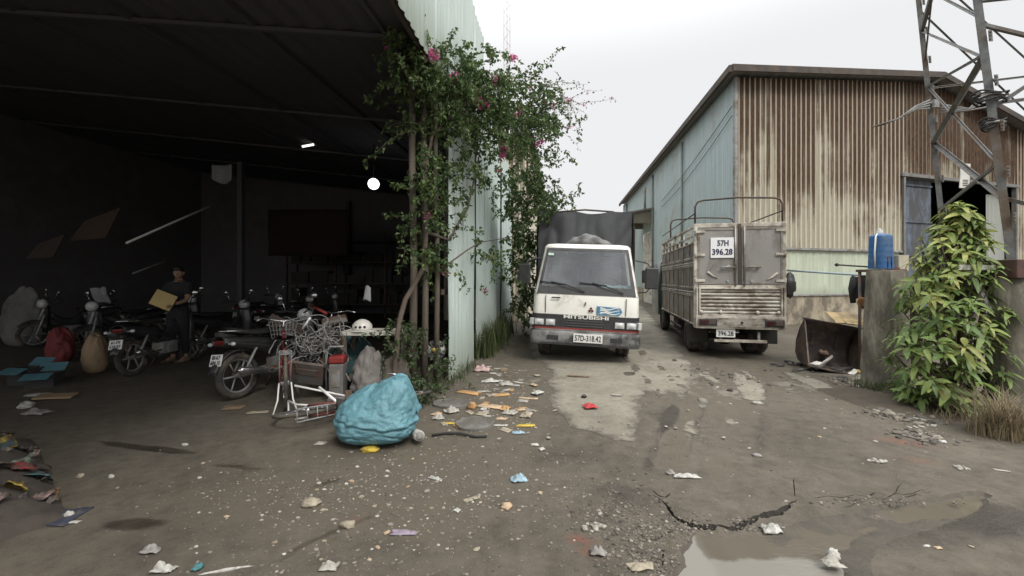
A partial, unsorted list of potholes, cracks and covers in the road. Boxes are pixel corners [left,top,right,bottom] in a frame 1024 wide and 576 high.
crack [634,480,797,572]
crack [809,485,930,508]
